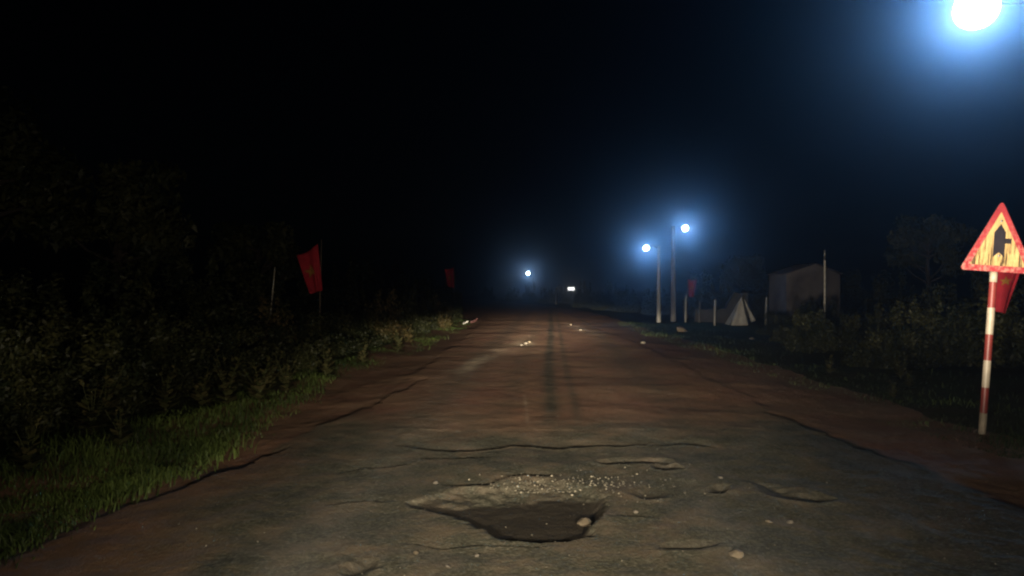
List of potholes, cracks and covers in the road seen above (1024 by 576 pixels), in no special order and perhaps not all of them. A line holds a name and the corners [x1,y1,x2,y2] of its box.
pothole [648,462,685,471]
pothole [705,483,736,494]
crack [759,408,945,473]
pothole [731,475,839,503]
pothole [402,475,613,544]
pothole [653,538,728,550]
crack [161,443,298,496]
crack [332,443,724,474]
pothole [594,456,675,465]
